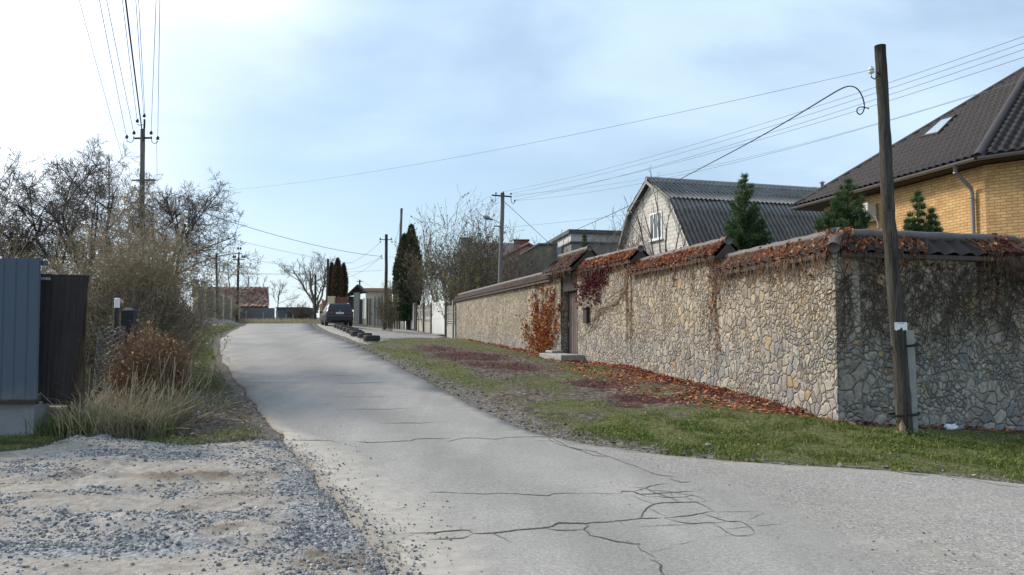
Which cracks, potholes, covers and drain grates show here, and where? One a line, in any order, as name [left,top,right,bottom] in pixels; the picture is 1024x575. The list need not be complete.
crack [420,483,771,575]
